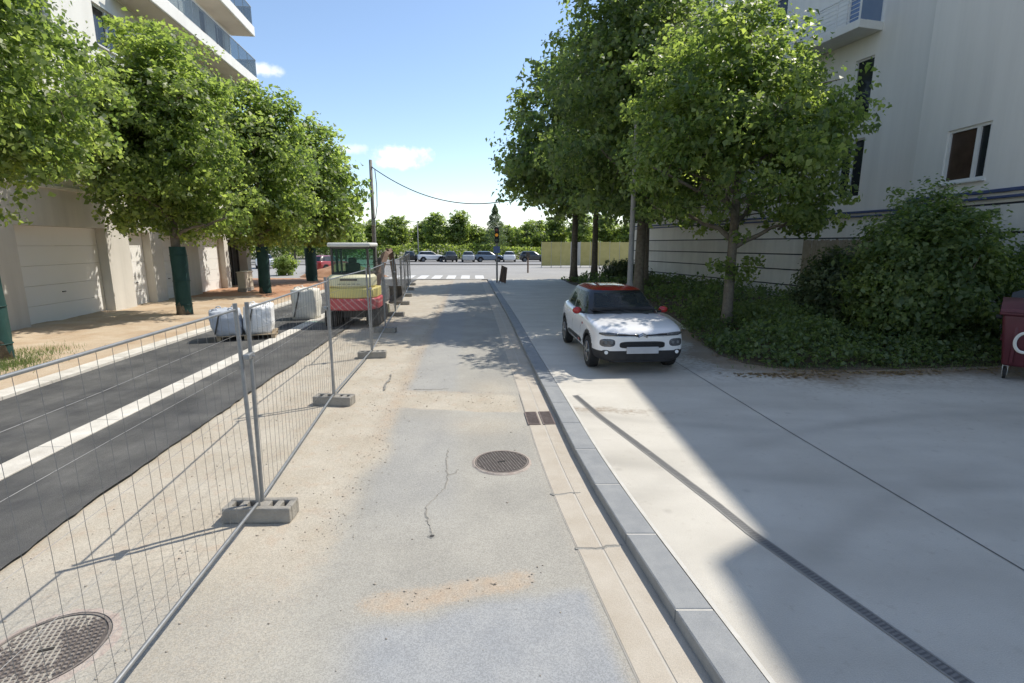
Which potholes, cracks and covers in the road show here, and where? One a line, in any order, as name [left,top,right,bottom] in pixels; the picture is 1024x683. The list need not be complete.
manhole cover [0,608,124,683]
manhole cover [472,450,531,476]
drain grate [524,411,556,425]
crack [424,450,458,534]
